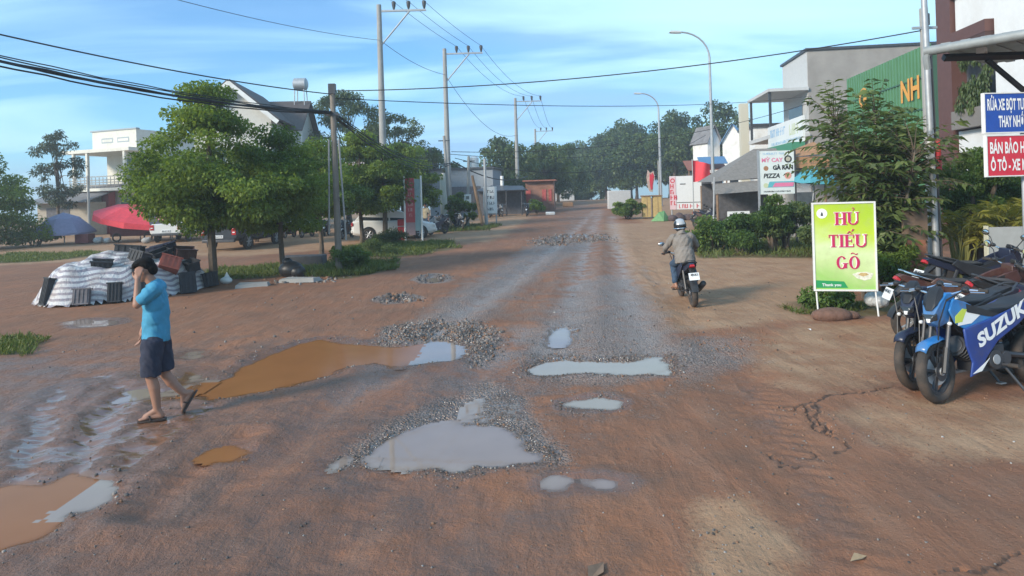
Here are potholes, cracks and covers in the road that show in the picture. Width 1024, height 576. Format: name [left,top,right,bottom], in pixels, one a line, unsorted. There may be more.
pothole [554,392,631,412]
pothole [0,466,135,556]
pothole [190,440,262,468]
pothole [355,419,555,477]
crack [937,551,1022,574]
pothole [416,273,446,283]
pothole [174,335,480,402]
pothole [517,354,686,378]
pothole [379,294,420,302]
pothole [532,233,605,245]
pothole [542,326,579,350]
